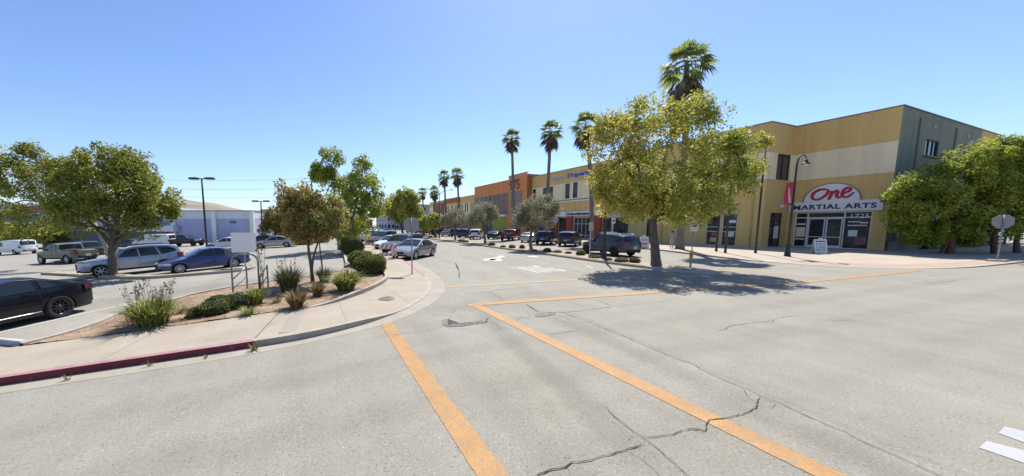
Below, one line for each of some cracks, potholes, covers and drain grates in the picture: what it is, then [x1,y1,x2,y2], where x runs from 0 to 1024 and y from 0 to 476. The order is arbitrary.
crack [363,261,666,339]
crack [530,398,759,476]
